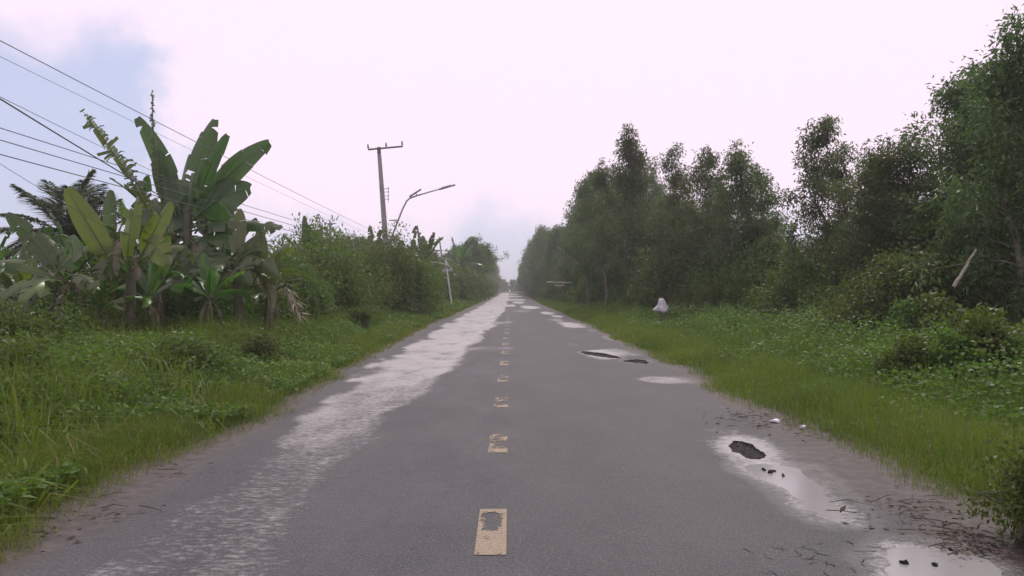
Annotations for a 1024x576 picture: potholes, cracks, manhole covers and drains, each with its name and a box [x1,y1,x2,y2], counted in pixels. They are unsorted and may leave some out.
pothole [728,441,767,459]
